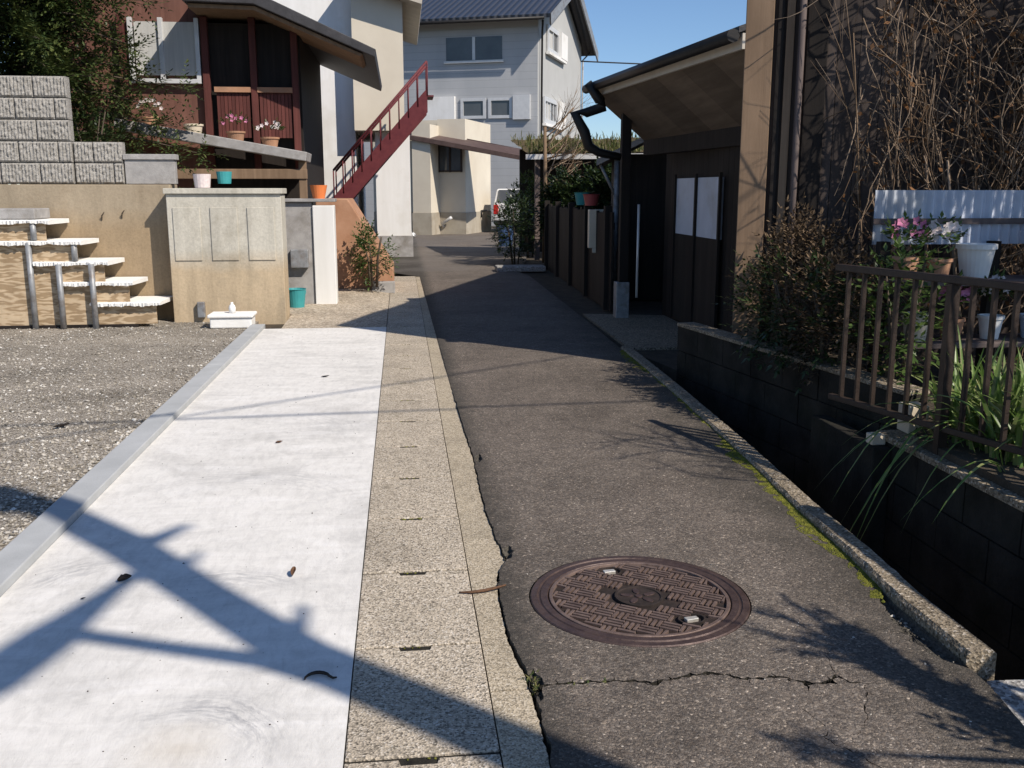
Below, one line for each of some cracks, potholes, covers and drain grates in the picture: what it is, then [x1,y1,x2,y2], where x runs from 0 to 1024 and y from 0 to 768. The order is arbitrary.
manhole cover [530,556,750,648]
crack [538,657,882,768]
